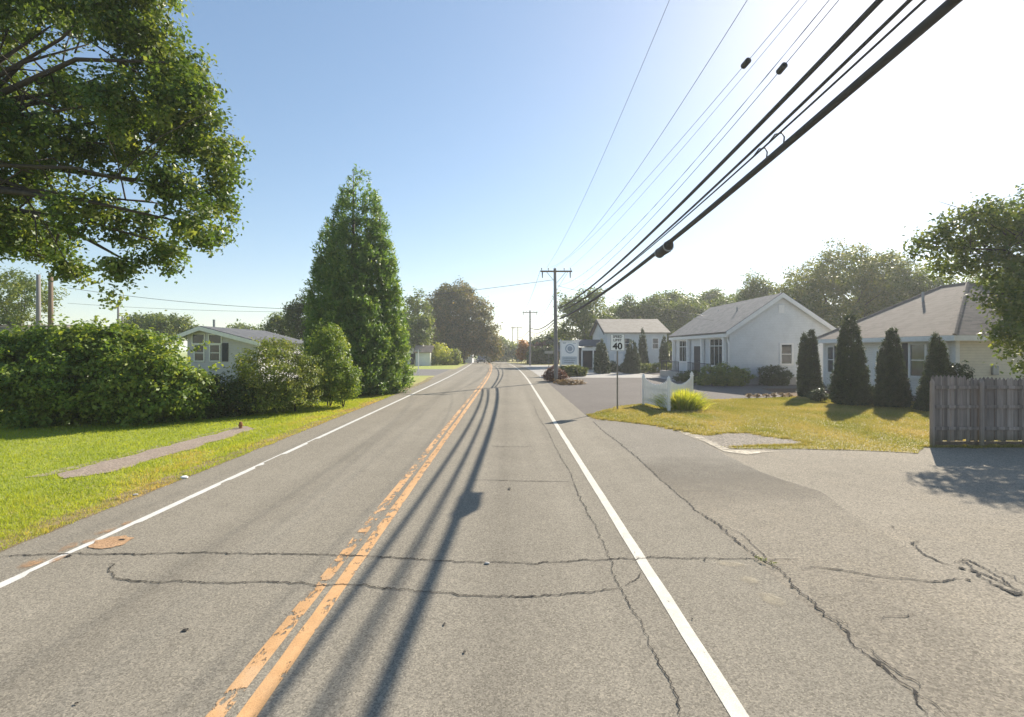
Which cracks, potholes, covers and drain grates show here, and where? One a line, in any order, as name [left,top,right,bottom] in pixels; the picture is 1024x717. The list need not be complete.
crack [805,541,1024,601]
manhole cover [88,535,134,549]
crack [6,409,761,715]
